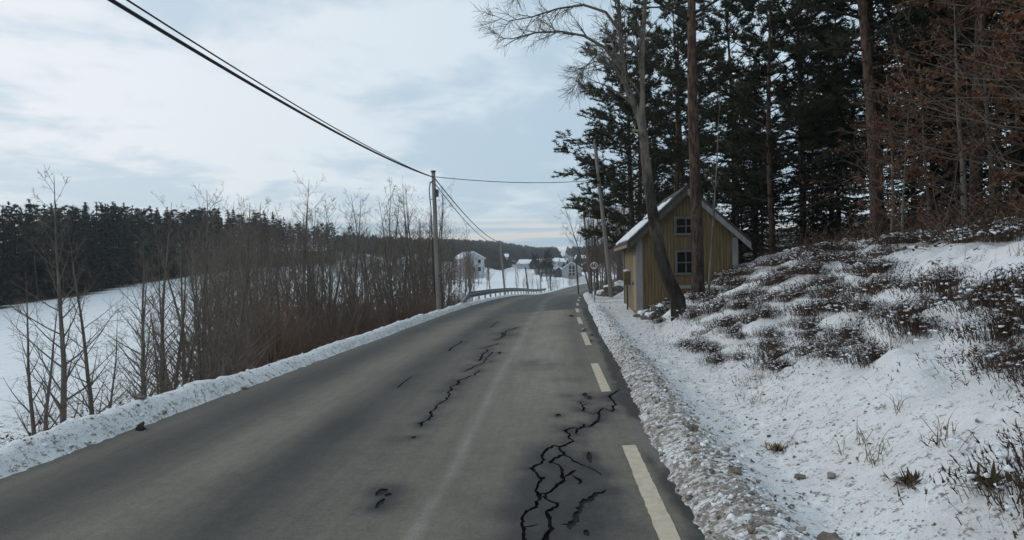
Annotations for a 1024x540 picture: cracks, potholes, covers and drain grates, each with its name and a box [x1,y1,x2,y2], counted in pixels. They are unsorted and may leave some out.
crack [418,323,517,427]
crack [520,389,620,540]
